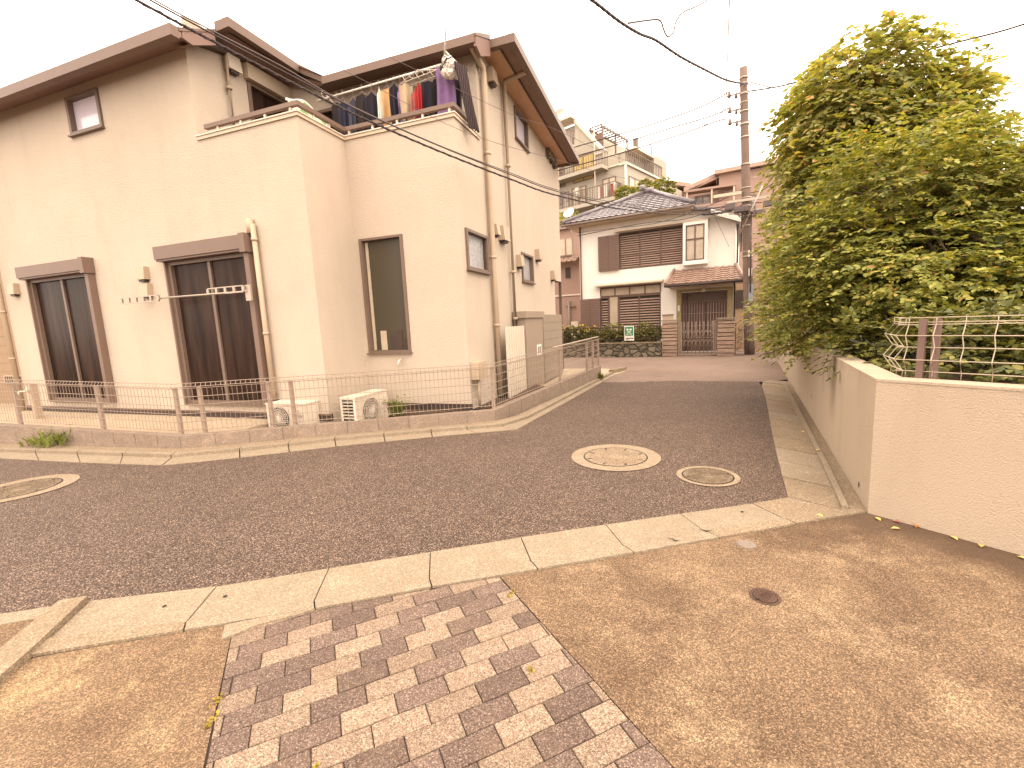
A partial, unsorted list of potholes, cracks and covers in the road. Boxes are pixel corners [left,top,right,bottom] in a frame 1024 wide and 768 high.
manhole cover [0,474,80,502]
manhole cover [676,466,740,486]
manhole cover [571,444,661,471]
utility cover [749,588,782,605]
